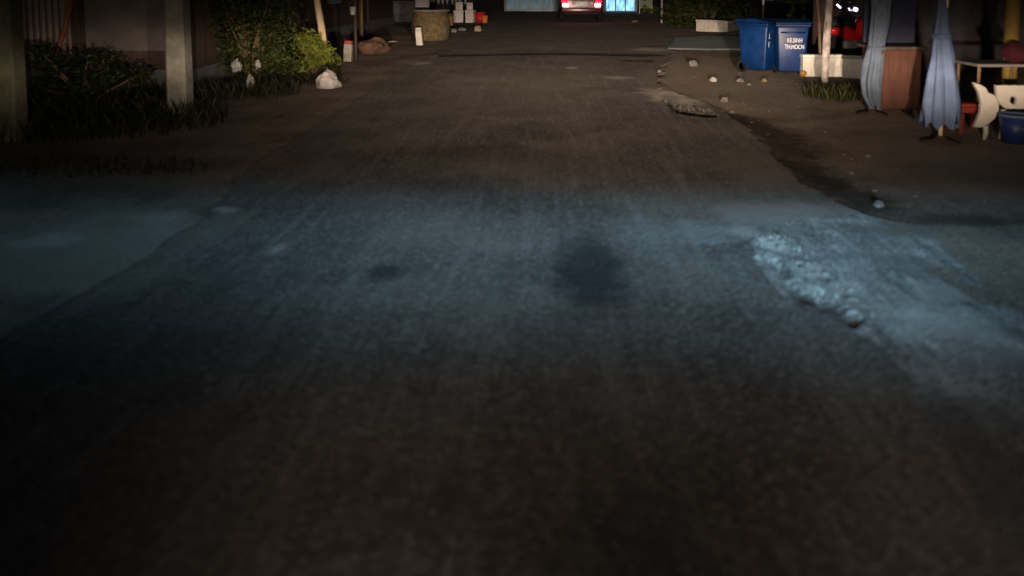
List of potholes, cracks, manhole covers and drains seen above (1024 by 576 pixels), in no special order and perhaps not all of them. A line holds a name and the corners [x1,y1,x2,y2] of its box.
pothole [661,99,720,117]
pothole [751,233,881,346]
